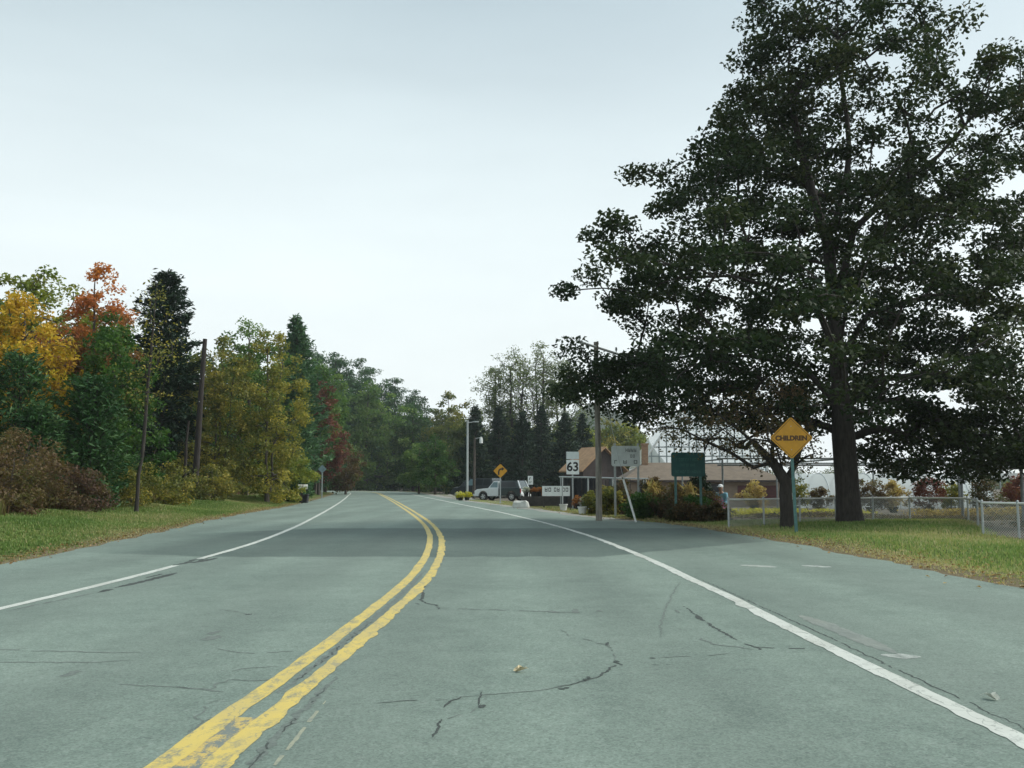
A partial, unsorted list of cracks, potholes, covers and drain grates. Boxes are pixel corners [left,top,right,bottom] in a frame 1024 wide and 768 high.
crack [0,649,140,677]
crack [119,609,339,768]
crack [415,586,603,613]
crack [695,576,1024,729]
crack [651,582,805,665]
crack [379,630,623,737]
